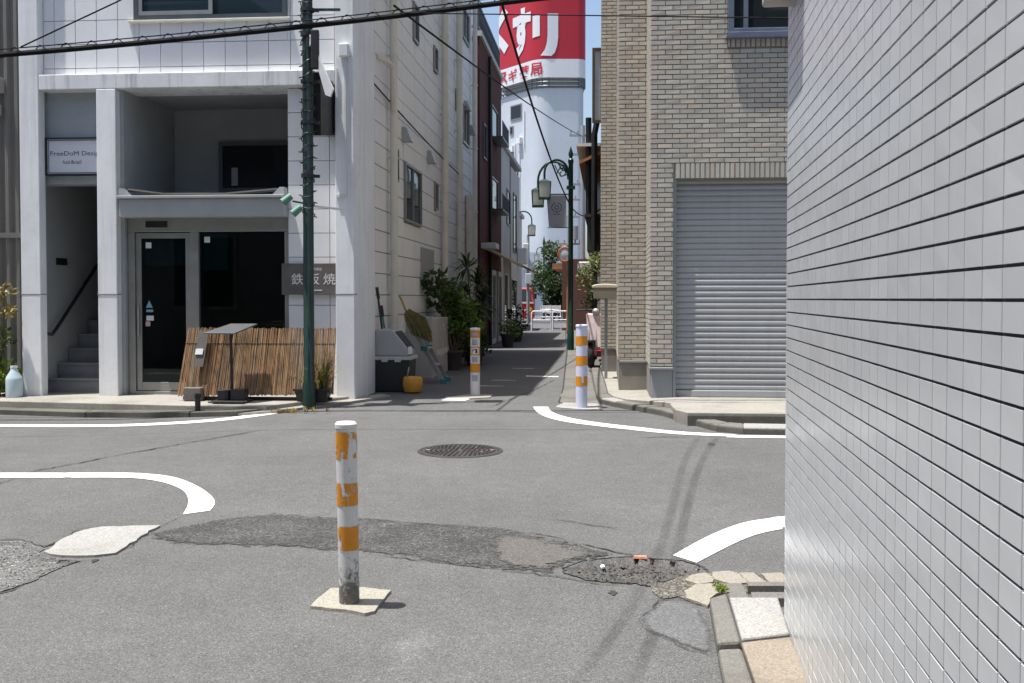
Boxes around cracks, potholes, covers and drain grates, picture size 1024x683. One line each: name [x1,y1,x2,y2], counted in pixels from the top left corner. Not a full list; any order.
manhole cover [417,444,503,458]
pothole [561,556,709,587]
